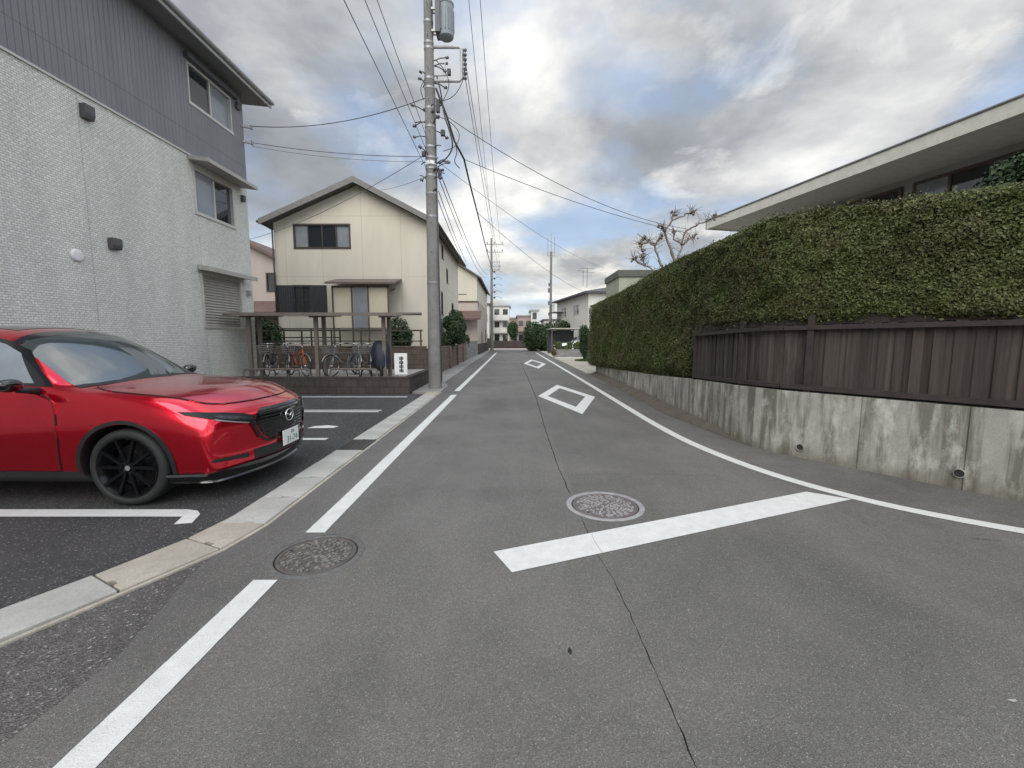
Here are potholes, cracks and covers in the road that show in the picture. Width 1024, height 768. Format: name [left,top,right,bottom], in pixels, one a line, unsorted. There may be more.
manhole cover [265,534,365,580]
manhole cover [566,491,645,521]
